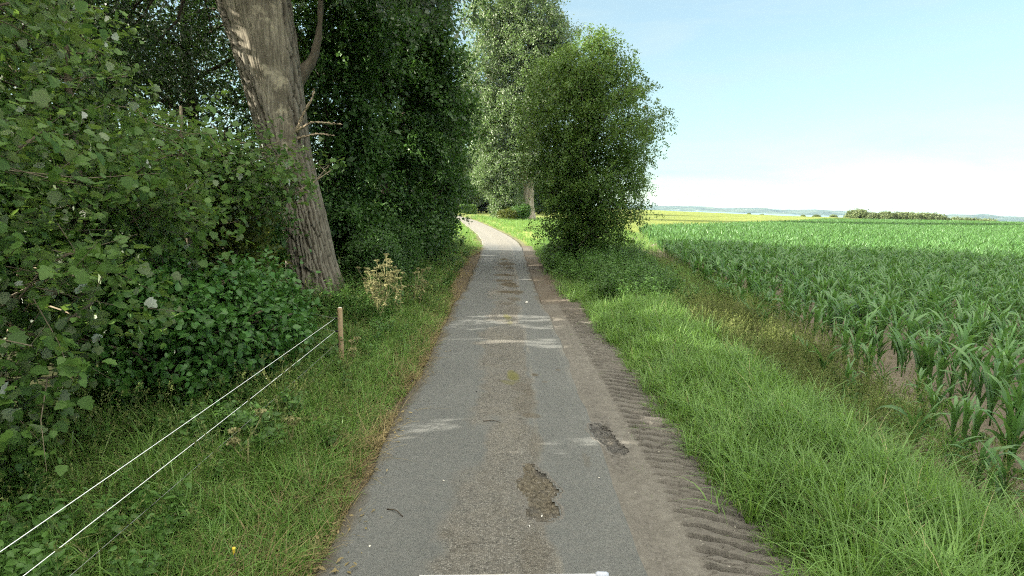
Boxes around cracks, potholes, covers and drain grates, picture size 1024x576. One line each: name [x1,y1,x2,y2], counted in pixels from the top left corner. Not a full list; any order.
pothole [511,463,565,525]
pothole [585,422,629,456]
